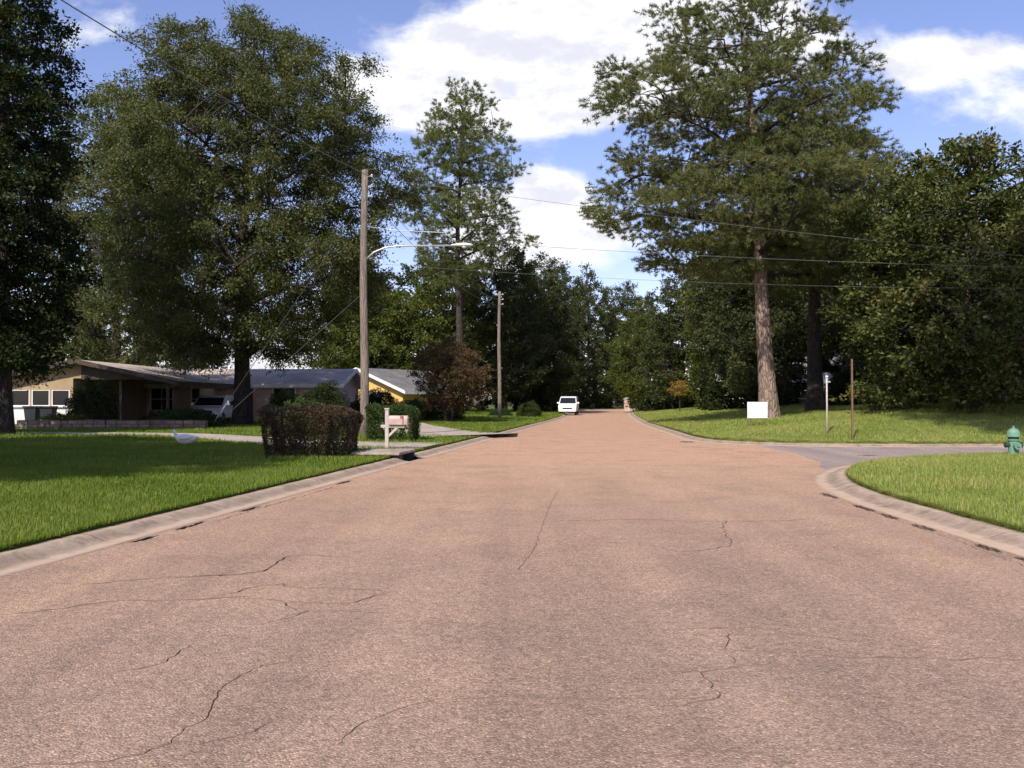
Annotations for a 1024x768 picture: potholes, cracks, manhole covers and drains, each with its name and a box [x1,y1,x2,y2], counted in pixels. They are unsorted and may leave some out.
crack [342,627,1019,739]
crack [2,555,392,623]
crack [106,647,188,673]
crack [543,519,819,552]
crack [12,660,300,768]
